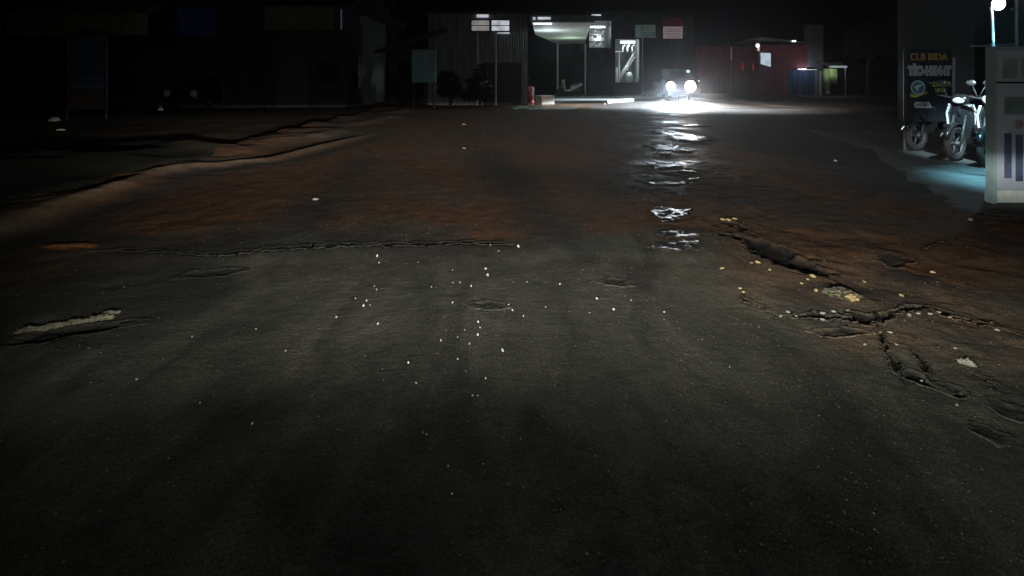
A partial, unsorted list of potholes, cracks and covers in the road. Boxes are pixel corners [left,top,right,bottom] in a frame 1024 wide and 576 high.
crack [88,239,518,257]
pothole [645,205,694,226]
pothole [585,276,637,288]
pothole [657,230,710,238]
pothole [645,241,700,254]
pothole [168,267,251,281]
pothole [465,299,513,313]
crack [920,236,973,250]
pothole [0,314,176,348]
crack [739,295,1024,397]
